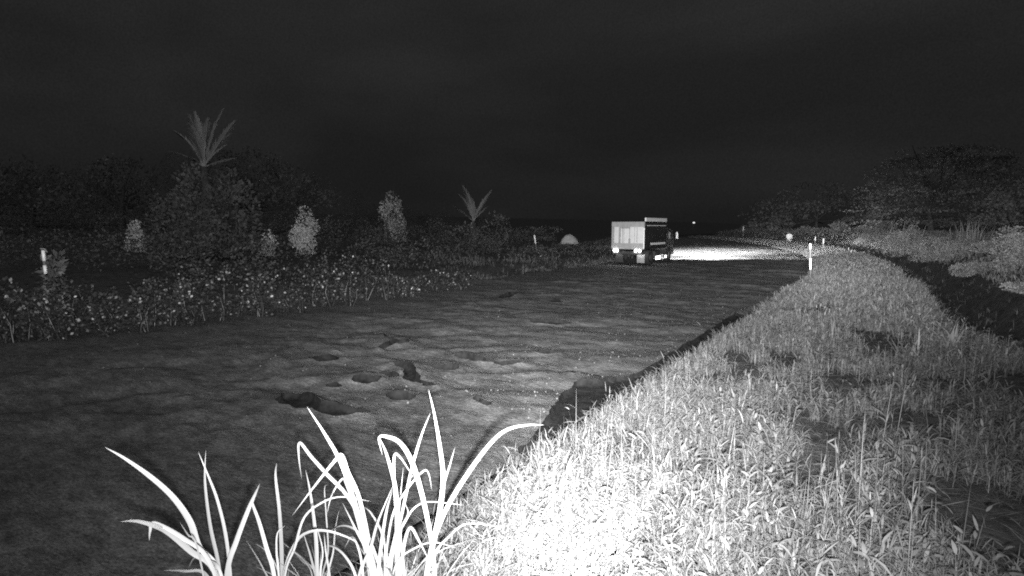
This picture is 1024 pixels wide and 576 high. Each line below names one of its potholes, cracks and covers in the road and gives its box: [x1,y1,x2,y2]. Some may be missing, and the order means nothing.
pothole [386,390,416,400]
pothole [393,361,435,386]
pothole [276,392,370,416]
pothole [351,373,381,383]
pothole [378,333,409,349]
